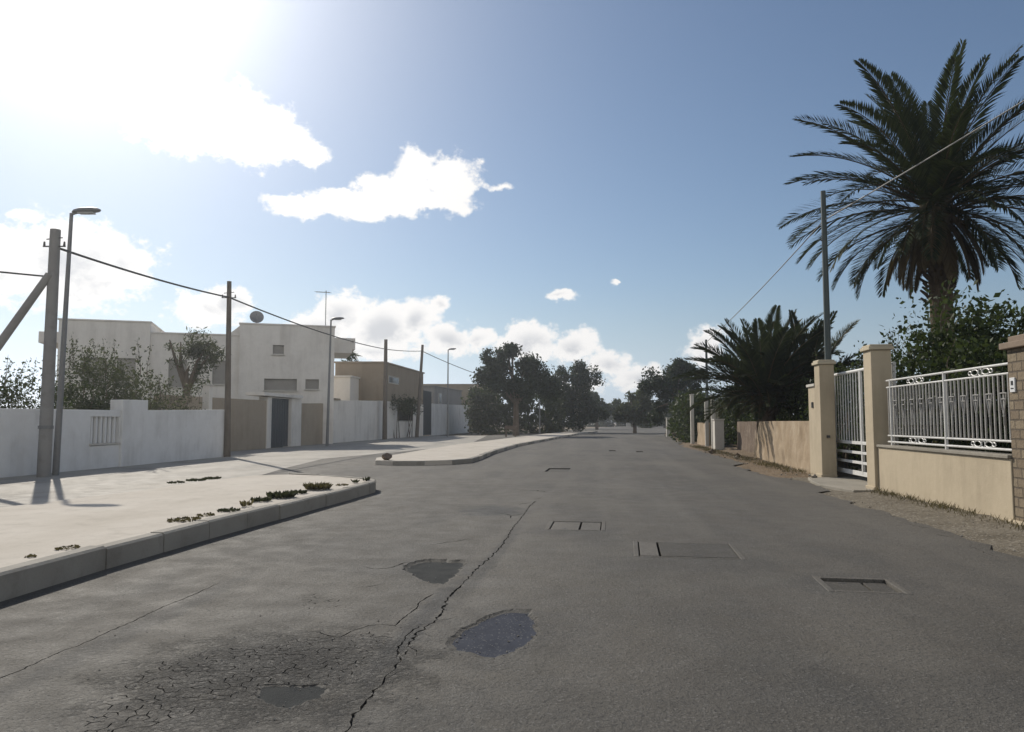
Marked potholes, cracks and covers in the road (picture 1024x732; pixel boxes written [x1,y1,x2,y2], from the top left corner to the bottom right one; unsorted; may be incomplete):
manhole cover [545,521,606,531]
pothole [251,682,333,709]
crack [85,561,433,732]
pothole [443,609,542,660]
manhole cover [633,541,747,560]
crack [0,585,214,678]
pothole [402,559,467,584]
manhole cover [812,576,913,594]
